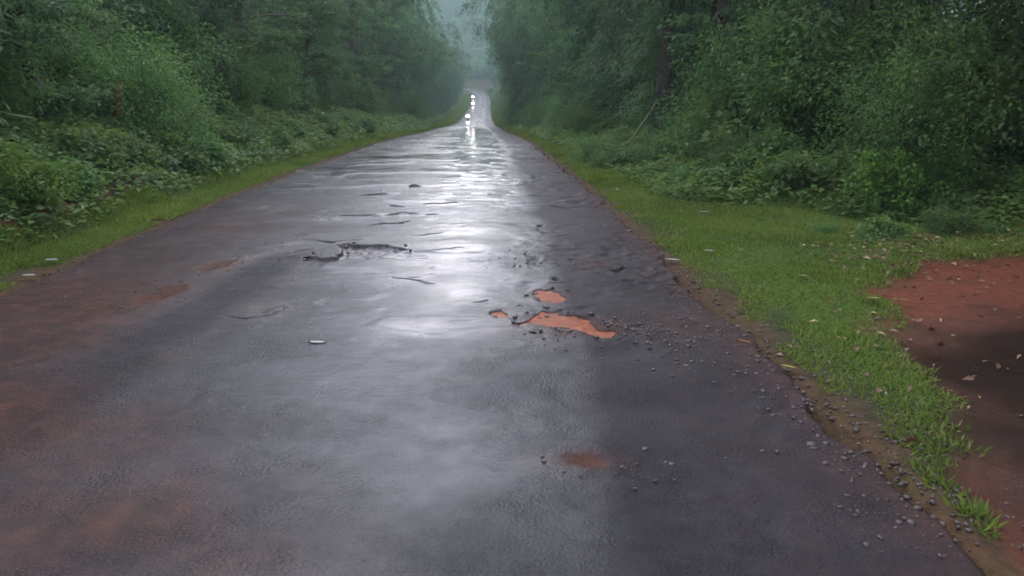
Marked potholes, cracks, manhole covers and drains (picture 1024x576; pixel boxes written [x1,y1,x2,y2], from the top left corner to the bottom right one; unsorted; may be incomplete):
pothole [276,238,417,266]
crack [383,275,444,287]
pothole [521,286,577,306]
pothole [506,306,633,342]
crack [331,193,471,253]
crack [214,304,294,322]
